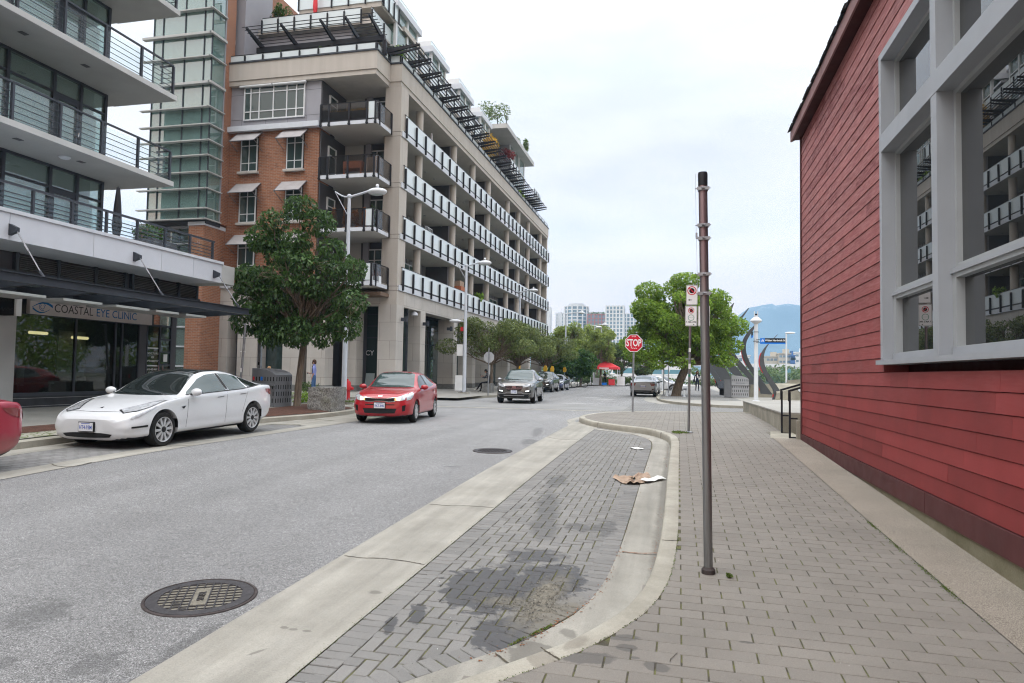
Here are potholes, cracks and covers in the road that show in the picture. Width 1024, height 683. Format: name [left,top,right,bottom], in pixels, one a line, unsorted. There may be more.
manhole cover [141,579,258,618]
